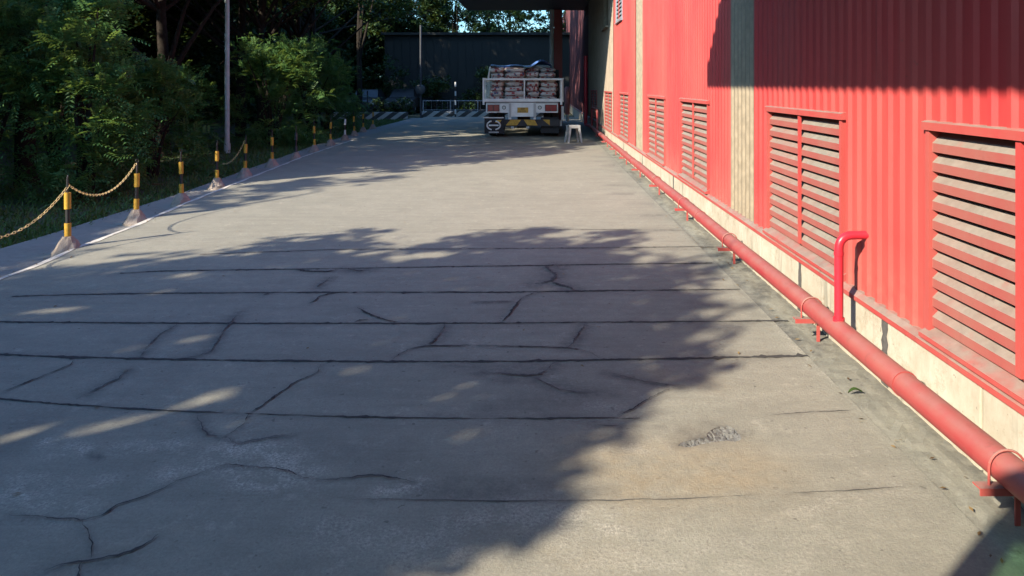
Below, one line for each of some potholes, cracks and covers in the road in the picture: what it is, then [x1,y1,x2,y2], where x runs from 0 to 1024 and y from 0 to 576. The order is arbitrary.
pothole [678,426,742,447]
crack [88,324,177,393]
crack [12,464,412,576]
crack [186,316,236,358]
crack [605,373,674,426]
crack [297,268,397,322]
crack [393,323,598,393]
crack [197,368,319,444]
crack [478,264,575,320]
